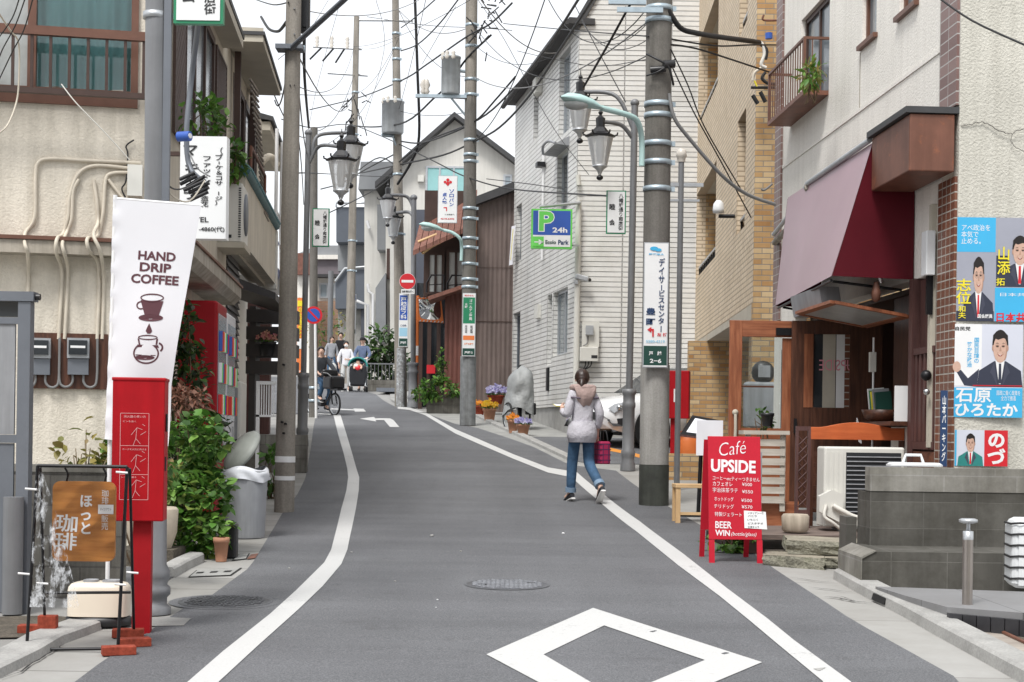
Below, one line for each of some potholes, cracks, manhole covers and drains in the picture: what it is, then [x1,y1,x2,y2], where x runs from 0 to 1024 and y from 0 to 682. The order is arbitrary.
manhole cover [464,579,549,590]
manhole cover [178,595,272,608]
